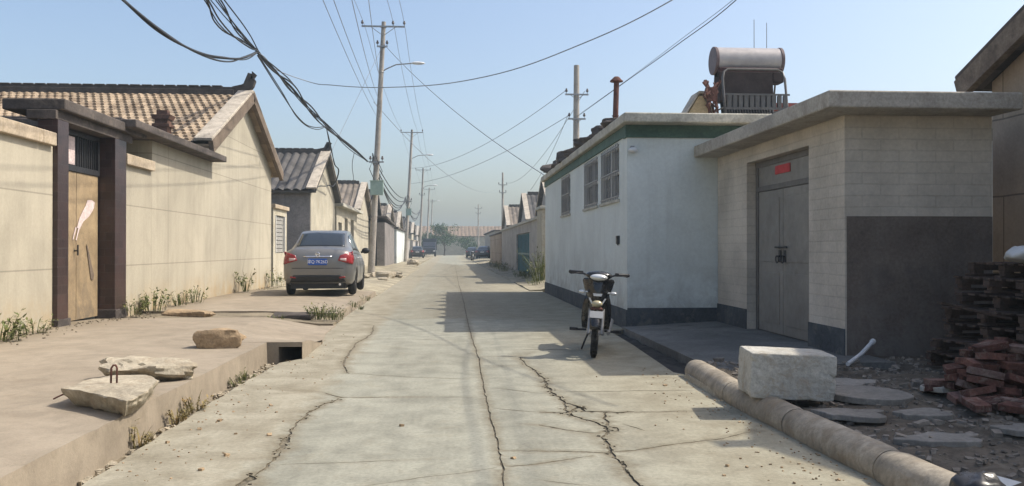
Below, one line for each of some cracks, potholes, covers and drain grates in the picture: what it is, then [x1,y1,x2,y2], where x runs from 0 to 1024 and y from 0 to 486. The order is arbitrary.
crack [235,393,391,486]
crack [367,268,748,486]
